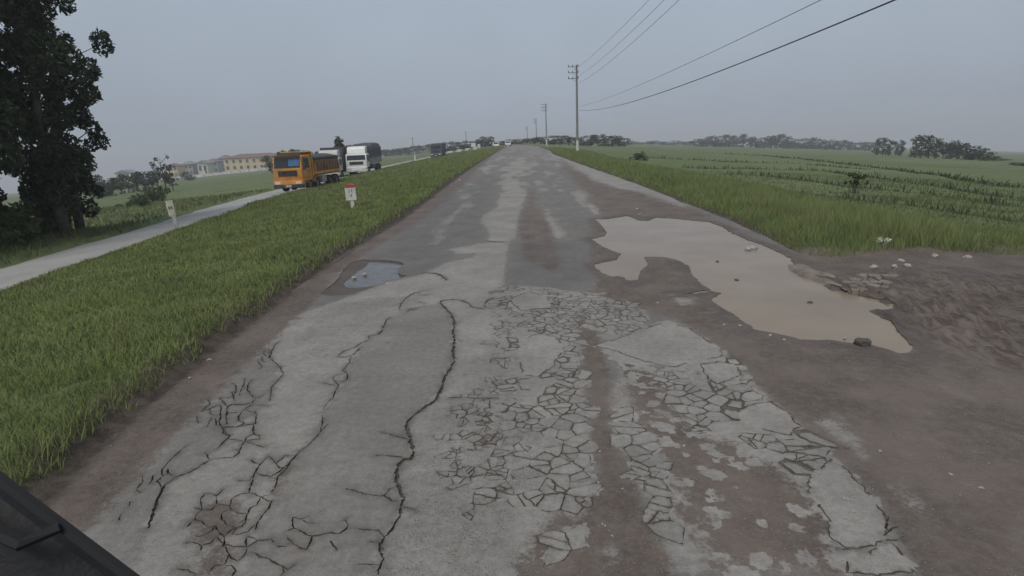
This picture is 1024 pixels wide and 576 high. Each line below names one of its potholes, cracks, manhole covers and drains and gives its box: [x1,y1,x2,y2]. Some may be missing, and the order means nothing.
crack [118,273,603,576]
pothole [592,216,913,353]
crack [594,323,915,576]
pothole [320,259,407,296]
